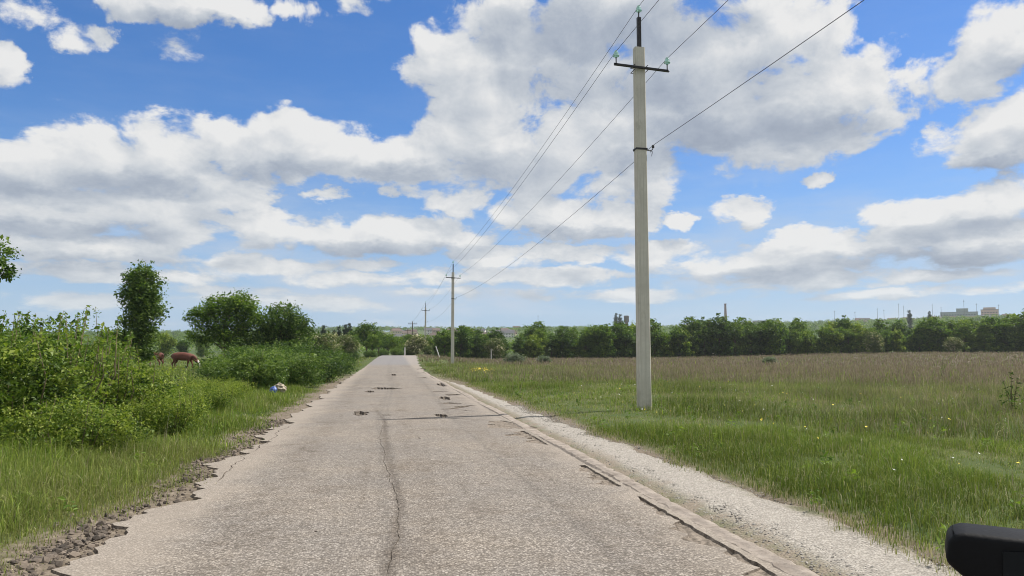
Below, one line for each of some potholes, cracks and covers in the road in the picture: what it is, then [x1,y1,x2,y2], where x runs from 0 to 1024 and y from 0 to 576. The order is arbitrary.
crack [379,414,400,573]
crack [218,427,289,481]
